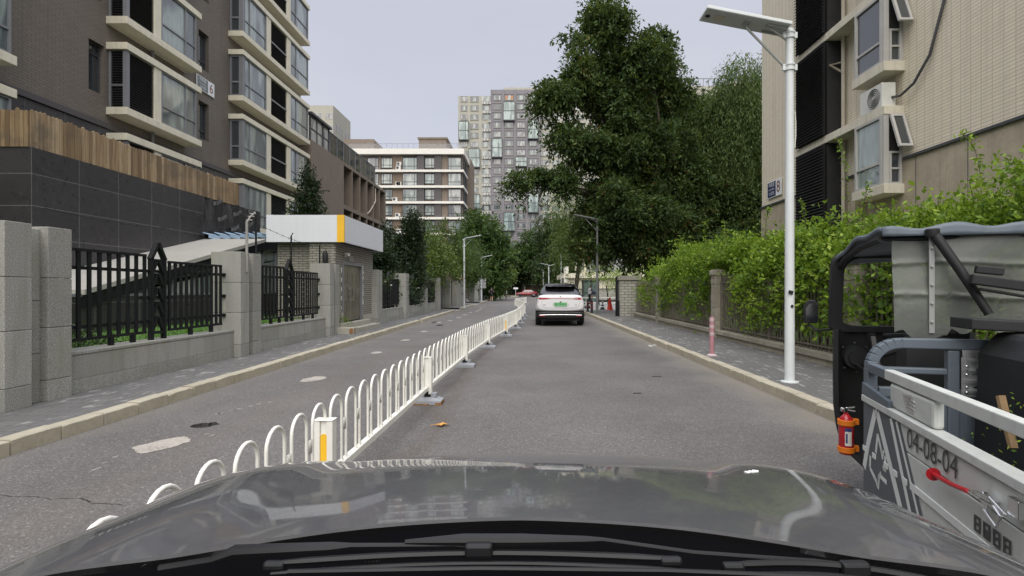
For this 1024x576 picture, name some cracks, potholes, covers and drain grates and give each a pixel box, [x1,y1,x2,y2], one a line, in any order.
crack [4,495,122,505]
